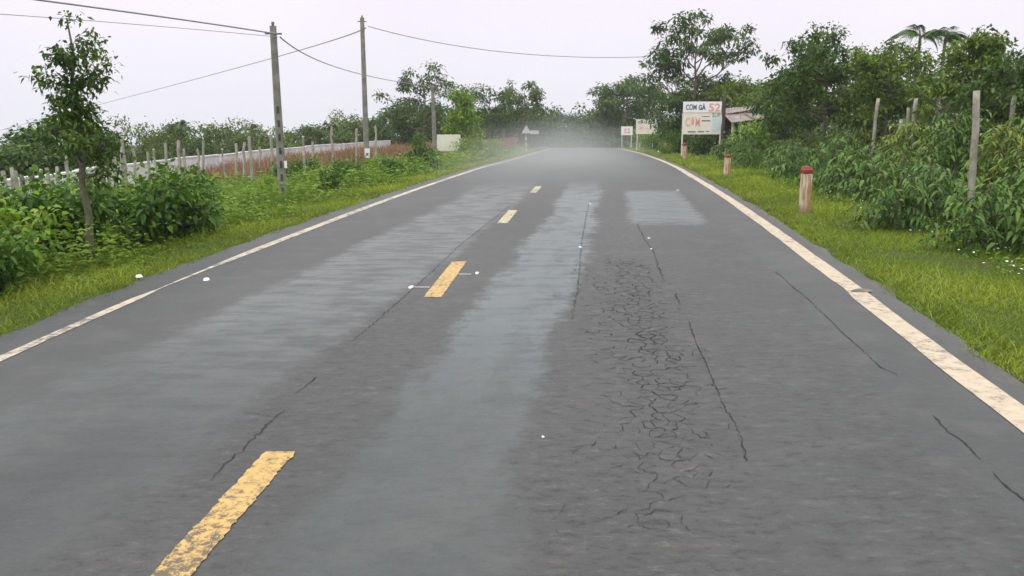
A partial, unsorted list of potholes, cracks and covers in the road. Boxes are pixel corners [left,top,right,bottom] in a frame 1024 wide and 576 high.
crack [210,206,509,480]
crack [506,226,756,534]
crack [776,272,898,375]
crack [933,415,1024,500]
